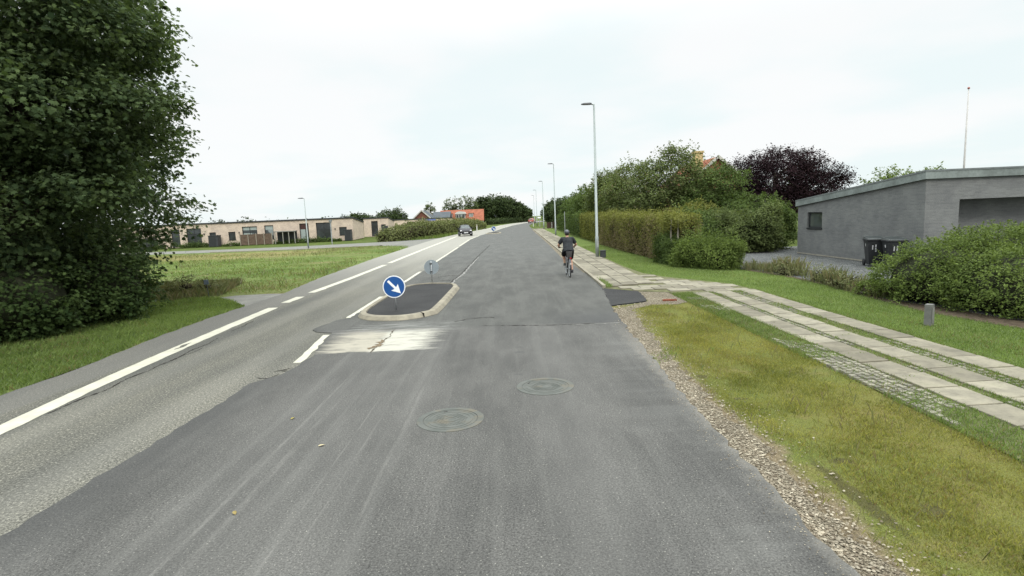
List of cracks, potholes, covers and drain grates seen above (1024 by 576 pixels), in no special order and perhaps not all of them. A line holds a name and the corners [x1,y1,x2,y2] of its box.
manhole cover [417,408,484,432]
crack [368,330,394,352]
manhole cover [517,378,574,395]
